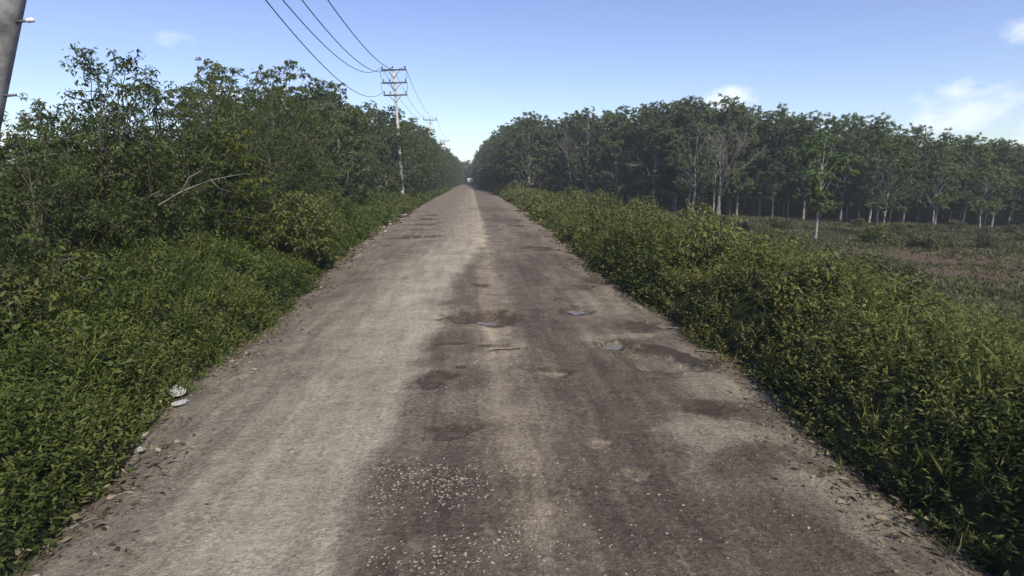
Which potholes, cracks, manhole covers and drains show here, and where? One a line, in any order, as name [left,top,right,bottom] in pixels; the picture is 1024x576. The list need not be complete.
pothole [423,307,543,331]
pothole [583,337,644,355]
pothole [405,369,467,392]
pothole [596,340,741,386]
pothole [551,303,607,319]
pothole [575,435,621,455]
pothole [609,463,662,492]
pothole [663,399,757,419]
pothole [419,419,498,446]
